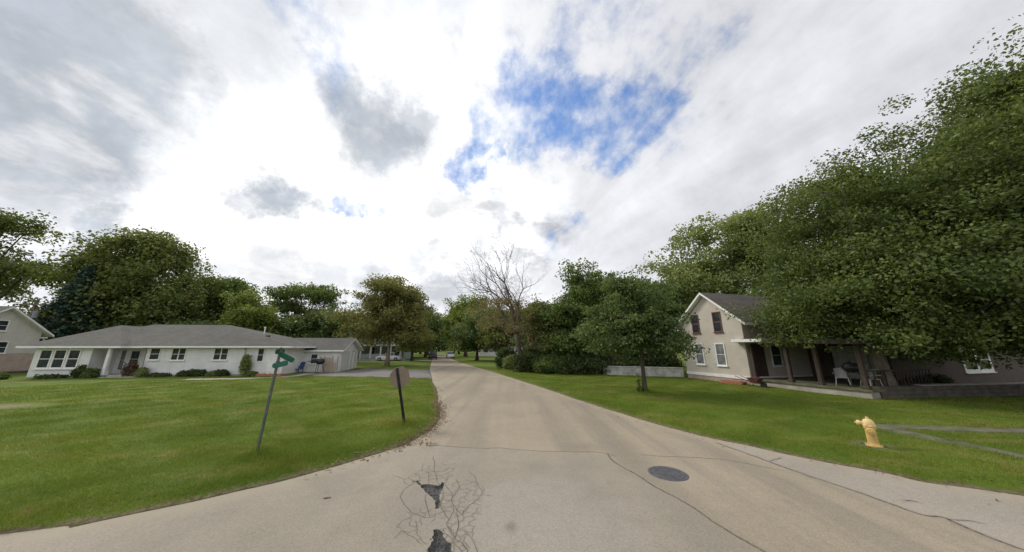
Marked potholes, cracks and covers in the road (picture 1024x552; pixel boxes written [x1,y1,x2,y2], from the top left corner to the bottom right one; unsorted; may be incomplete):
manhole cover [648,466,689,481]
pothole [414,480,444,509]
crack [397,445,766,552]
pothole [426,529,452,552]
